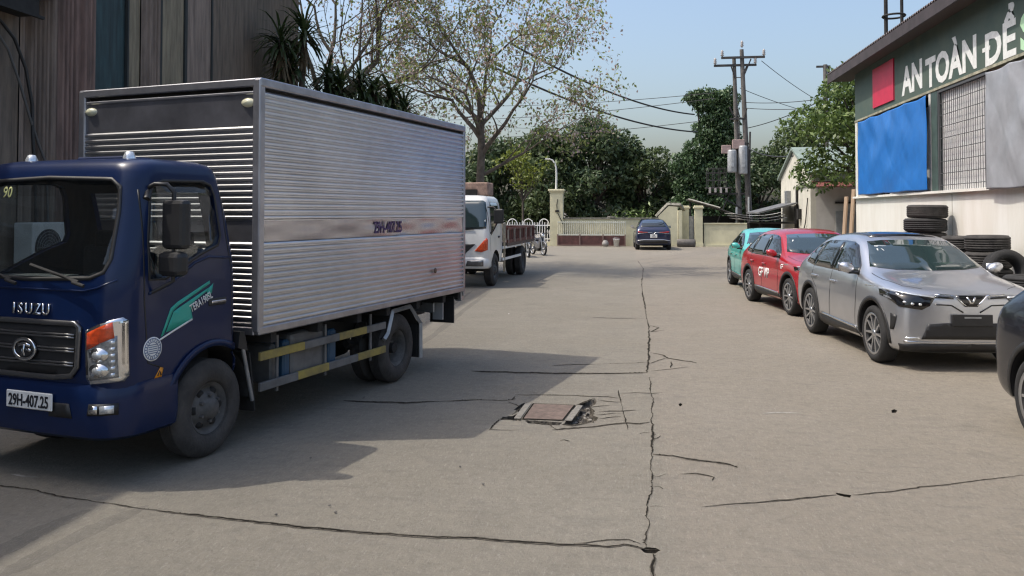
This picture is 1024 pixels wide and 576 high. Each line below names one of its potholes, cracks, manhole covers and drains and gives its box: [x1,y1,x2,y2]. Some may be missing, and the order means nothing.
crack [344,352,738,489]
crack [0,485,662,550]
manhole cover [514,403,583,421]
